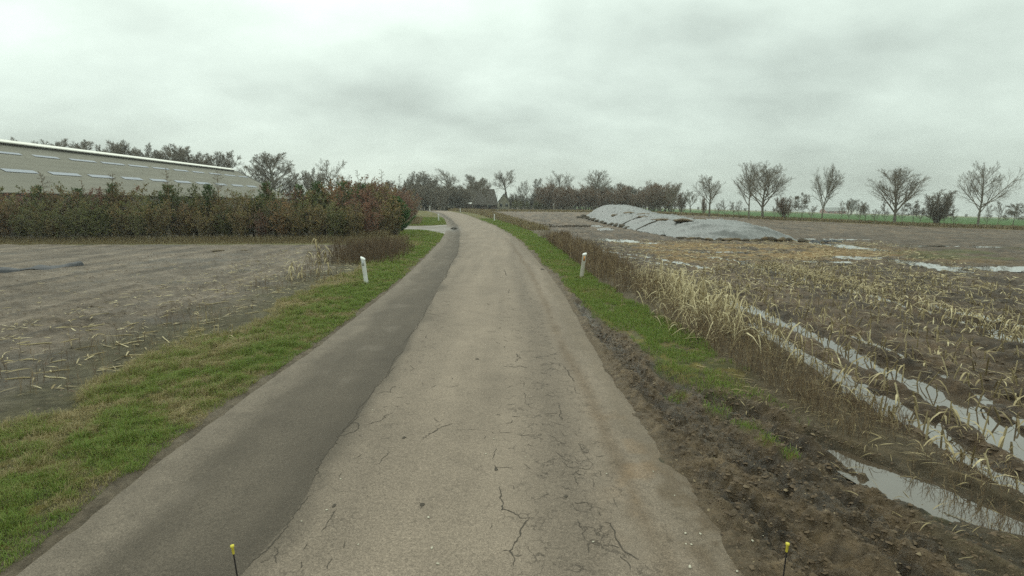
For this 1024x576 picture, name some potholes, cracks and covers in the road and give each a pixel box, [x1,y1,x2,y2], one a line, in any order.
crack [422,270,638,570]
